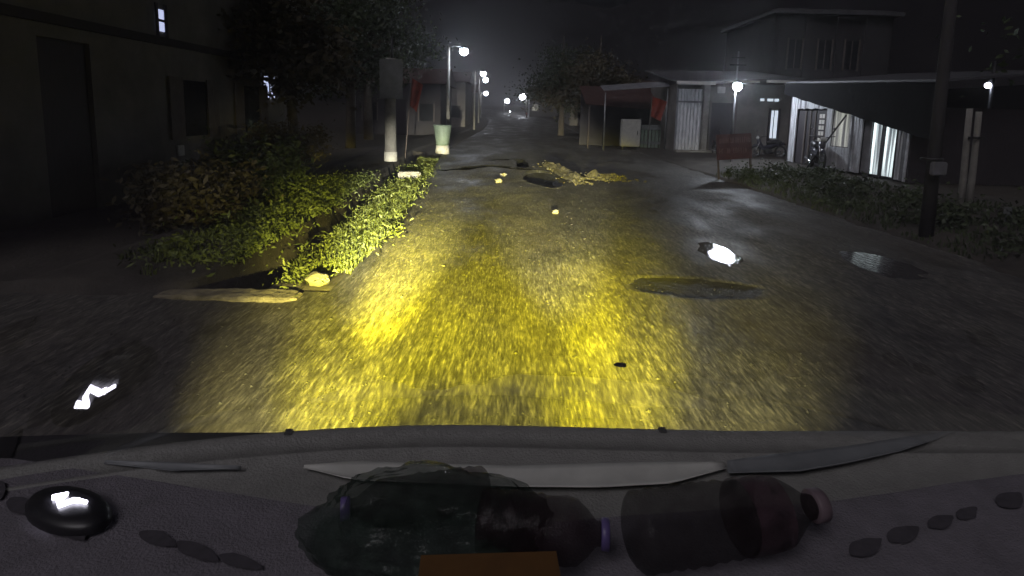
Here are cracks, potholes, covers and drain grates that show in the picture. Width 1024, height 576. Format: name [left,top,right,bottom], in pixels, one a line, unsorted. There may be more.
pothole [519,170,569,189]
pothole [613,273,782,305]
